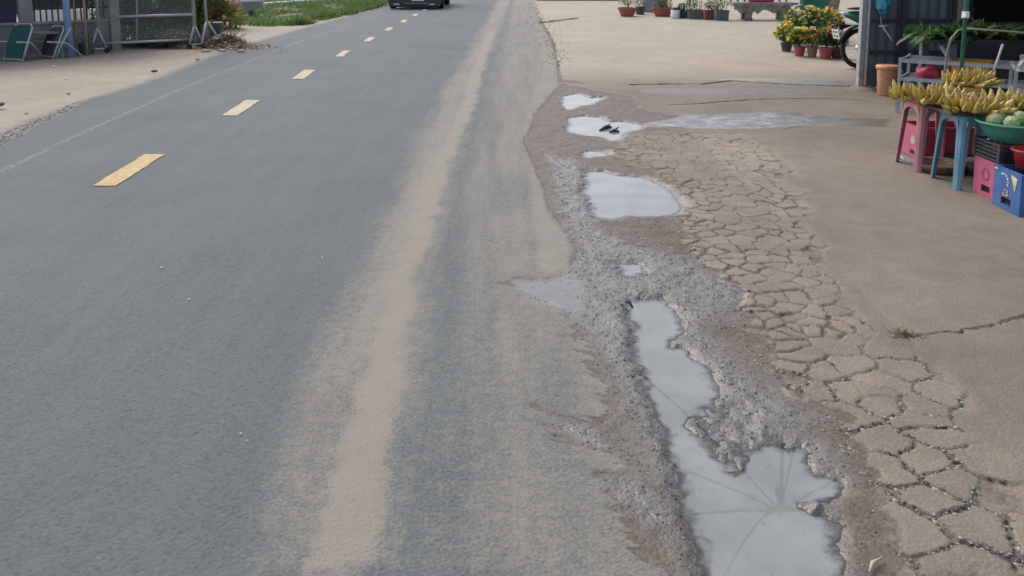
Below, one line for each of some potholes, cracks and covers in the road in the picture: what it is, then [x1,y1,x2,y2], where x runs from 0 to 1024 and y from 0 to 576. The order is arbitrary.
crack [627,80,882,105]
pothole [562,114,650,142]
pothole [557,92,610,110]
pothole [577,168,693,222]
pothole [606,257,657,281]
pothole [614,291,868,576]
crack [605,131,1024,576]
